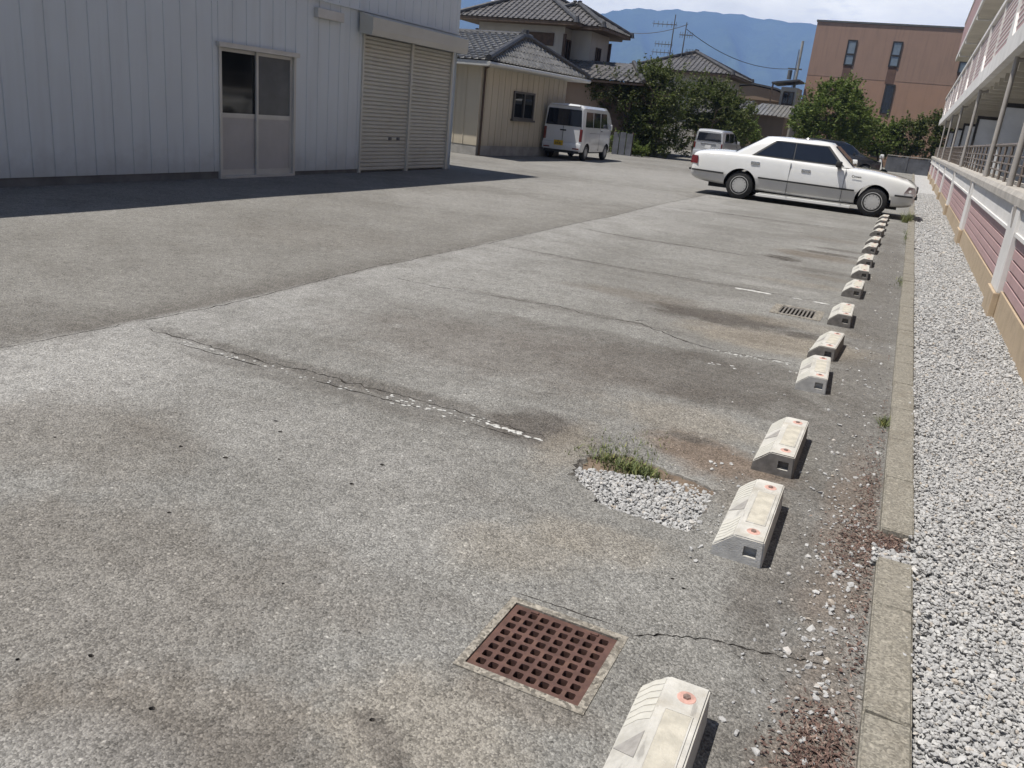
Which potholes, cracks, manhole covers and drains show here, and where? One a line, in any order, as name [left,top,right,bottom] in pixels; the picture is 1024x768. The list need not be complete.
crack [510,591,828,668]
crack [146,327,552,440]
drain grate [453,596,629,716]
pothole [568,451,718,530]
crack [387,276,794,363]
drain grate [769,303,825,321]
